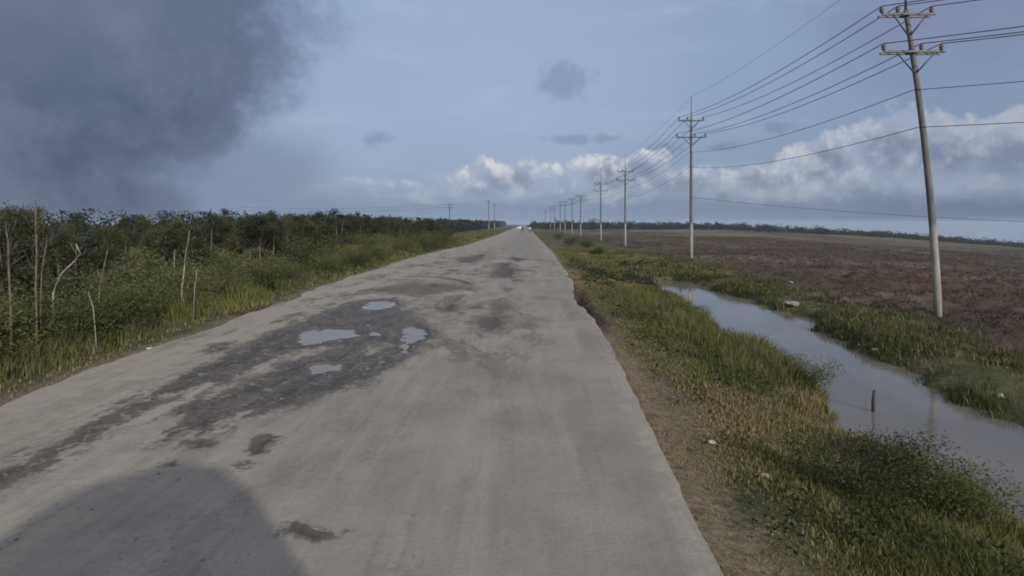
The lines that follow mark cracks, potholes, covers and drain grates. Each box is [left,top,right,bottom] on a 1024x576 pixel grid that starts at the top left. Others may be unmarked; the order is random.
pothole [291,521,322,539]
pothole [395,324,432,354]
pothole [293,327,369,345]
pothole [248,435,274,455]
pothole [359,300,399,310]
pothole [304,361,347,374]
